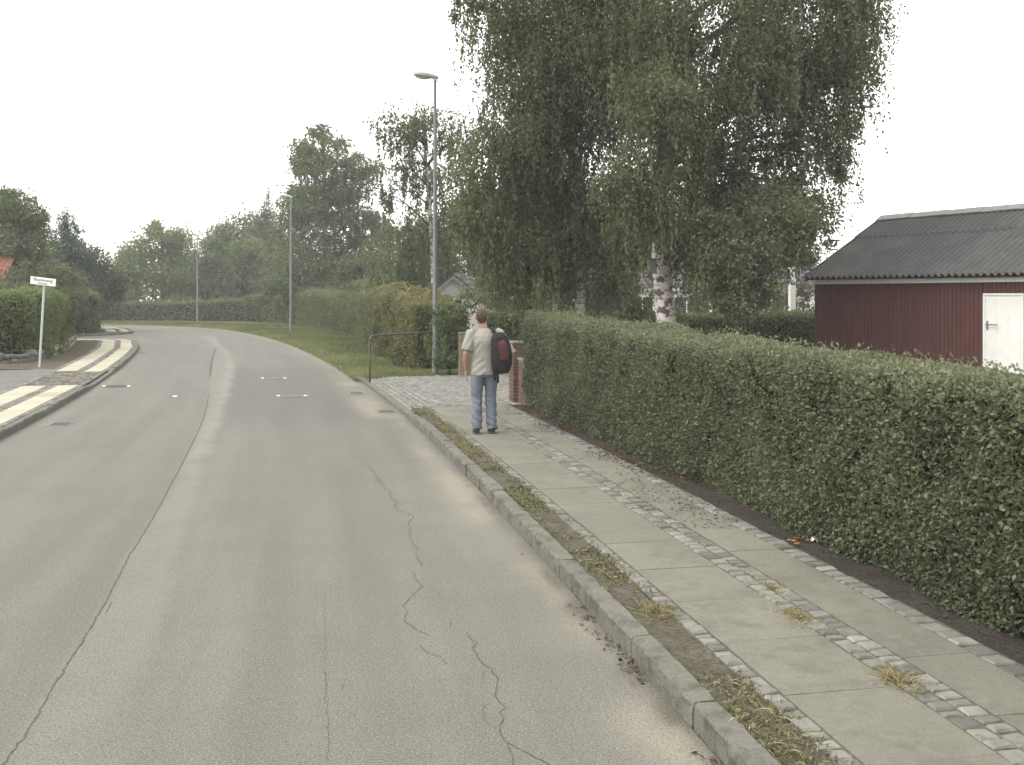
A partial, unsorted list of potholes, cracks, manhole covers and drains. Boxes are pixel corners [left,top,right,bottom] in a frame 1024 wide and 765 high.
crack [323,592,343,764]
crack [467,633,550,765]
crack [368,464,451,663]
